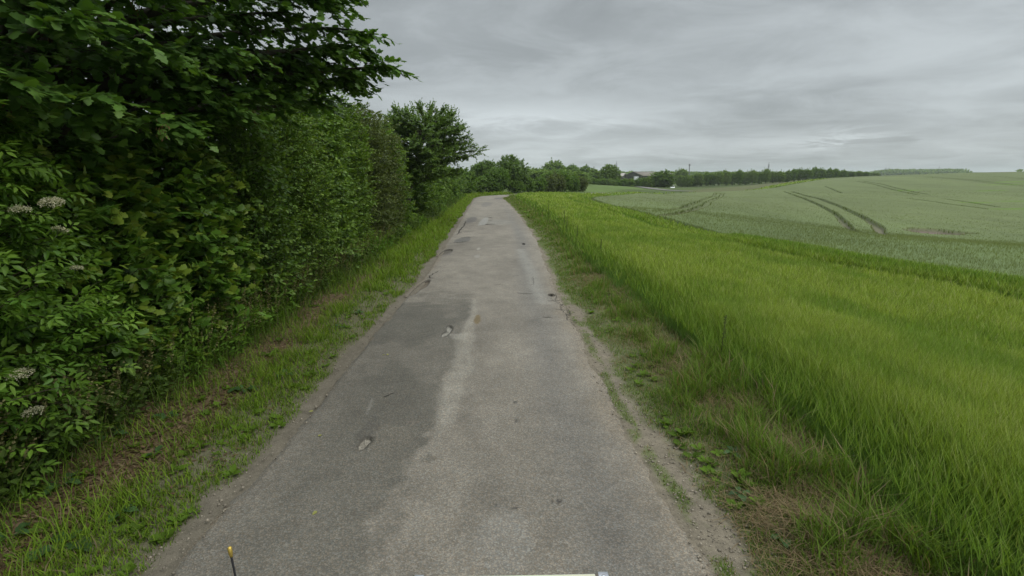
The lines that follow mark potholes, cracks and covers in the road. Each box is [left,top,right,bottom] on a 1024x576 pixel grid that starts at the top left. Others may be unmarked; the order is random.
pothole [404,279,432,297]
pothole [351,434,378,453]
pothole [438,324,456,338]
